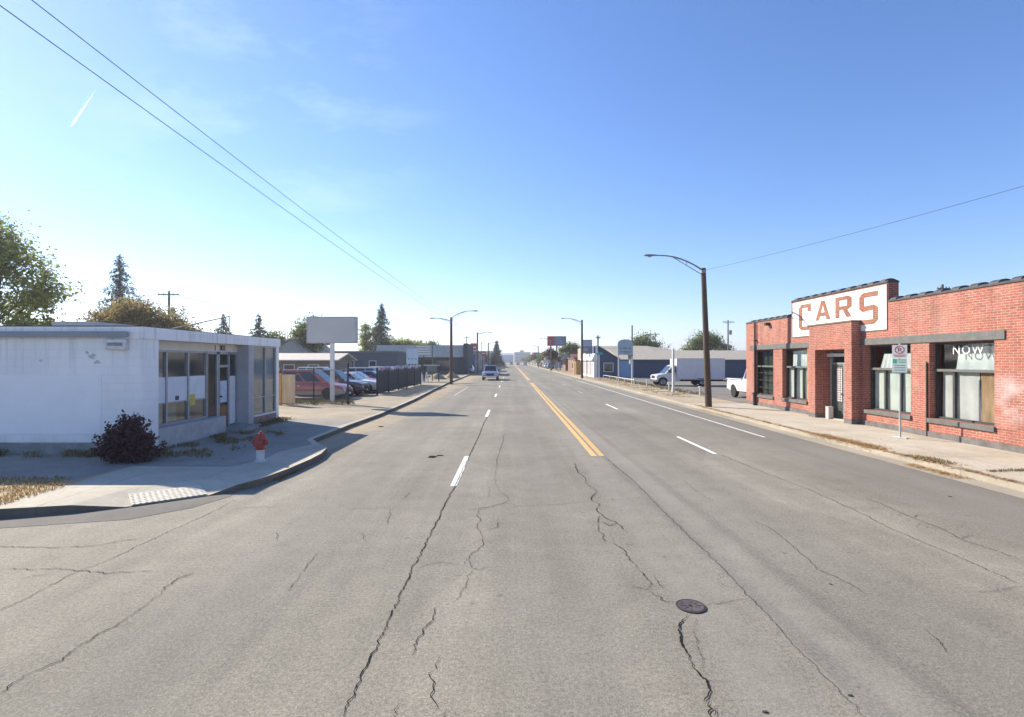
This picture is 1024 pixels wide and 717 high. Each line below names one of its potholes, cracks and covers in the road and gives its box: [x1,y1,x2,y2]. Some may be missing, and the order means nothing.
crack [429,659,447,716]
crack [421,435,511,603]
crack [522,455,747,717]
manhole cover [676,599,706,613]
crack [2,573,191,692]
